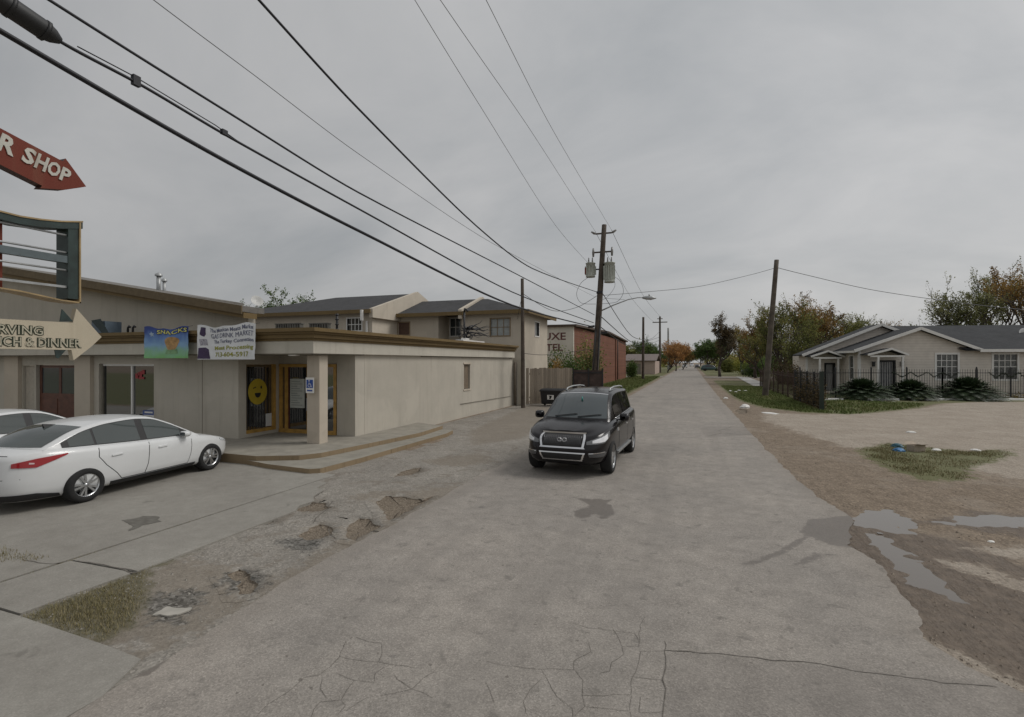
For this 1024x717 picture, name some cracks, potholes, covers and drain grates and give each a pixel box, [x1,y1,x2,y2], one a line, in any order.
pothole [365,493,443,524]
pothole [289,499,343,516]
pothole [284,521,347,545]
crack [484,617,997,717]
pothole [209,563,277,603]
pothole [332,515,392,545]
pothole [386,466,429,478]
crack [262,637,433,717]
